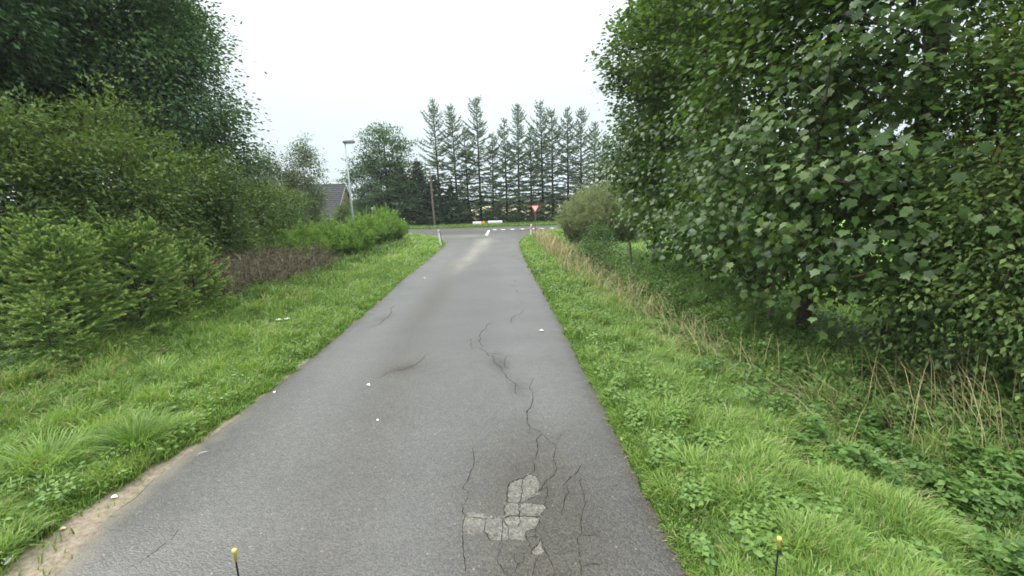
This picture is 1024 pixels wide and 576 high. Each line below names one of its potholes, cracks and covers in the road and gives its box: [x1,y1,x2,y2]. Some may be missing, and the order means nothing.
crack [461,323,607,575]
